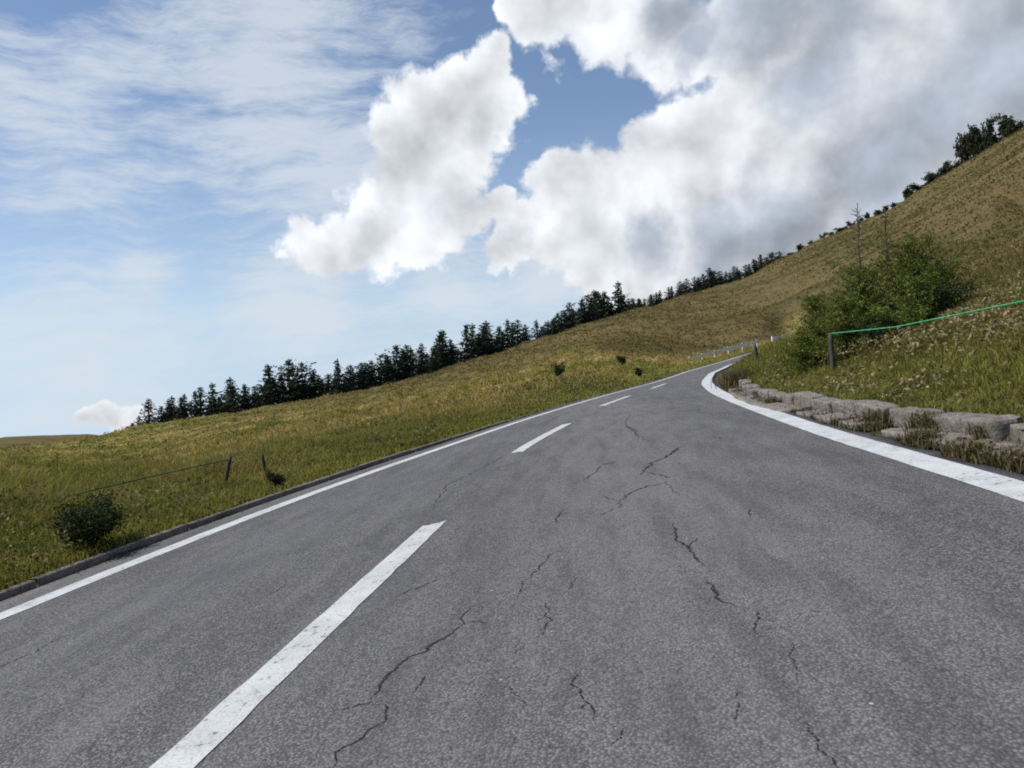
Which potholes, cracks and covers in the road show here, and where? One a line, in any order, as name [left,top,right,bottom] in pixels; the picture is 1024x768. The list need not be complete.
crack [331,601,487,768]
crack [569,673,595,721]
crack [602,418,680,514]
crack [706,581,736,606]
crack [807,724,837,766]
crack [672,523,704,564]
